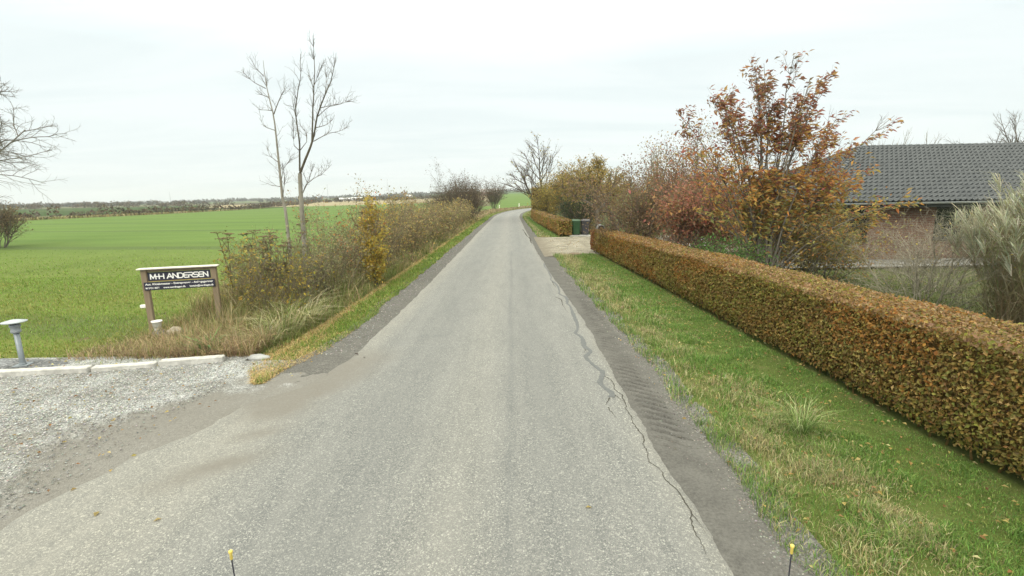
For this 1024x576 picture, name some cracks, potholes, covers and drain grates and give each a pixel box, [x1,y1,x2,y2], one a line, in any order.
crack [543,263,714,566]
